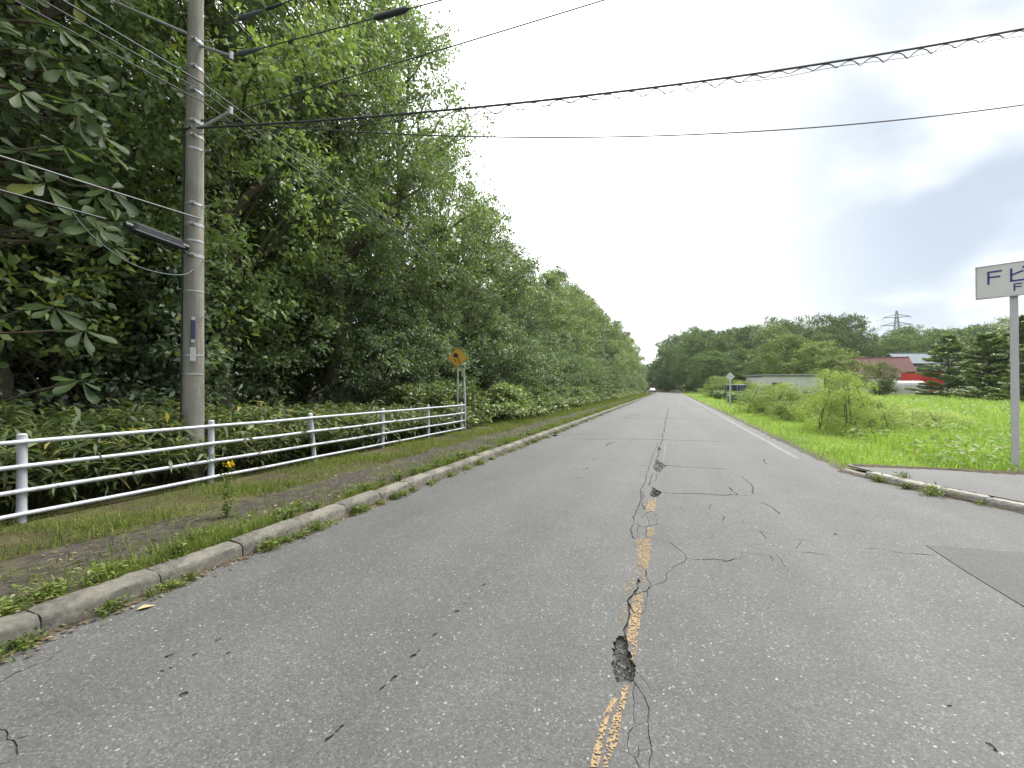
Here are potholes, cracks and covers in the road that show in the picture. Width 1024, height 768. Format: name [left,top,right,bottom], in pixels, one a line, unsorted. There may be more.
crack [586,407,934,642]
crack [627,670,653,768]
pothole [611,636,636,683]
crack [0,729,26,765]
